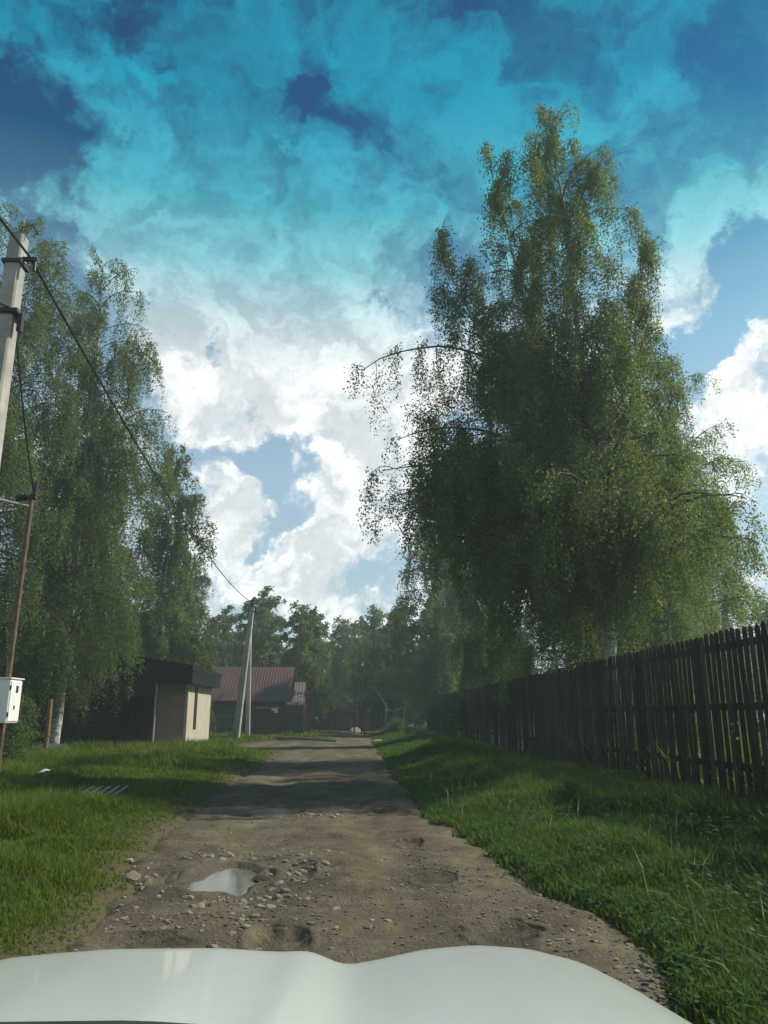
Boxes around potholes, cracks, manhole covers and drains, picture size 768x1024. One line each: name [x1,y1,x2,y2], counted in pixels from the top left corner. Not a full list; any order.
pothole [457,916,555,948]
pothole [392,836,429,850]
pothole [405,870,463,889]
pothole [236,922,321,952]
pothole [165,858,287,899]
